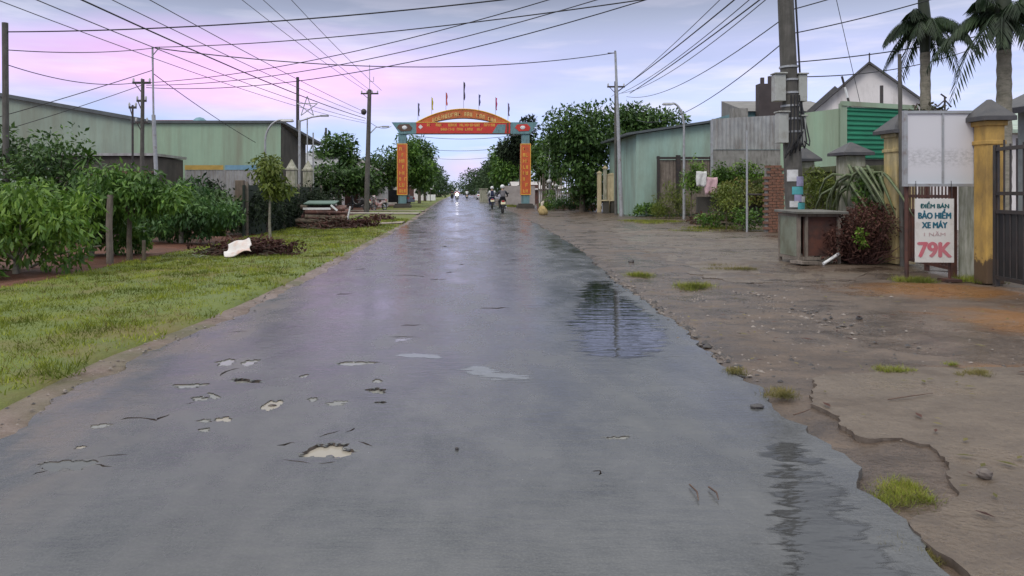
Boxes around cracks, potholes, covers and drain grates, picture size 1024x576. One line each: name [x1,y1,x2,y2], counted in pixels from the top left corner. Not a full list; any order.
pothole [260,399,284,411]
pothole [296,442,360,459]
pothole [214,358,237,367]
crack [33,454,128,475]
